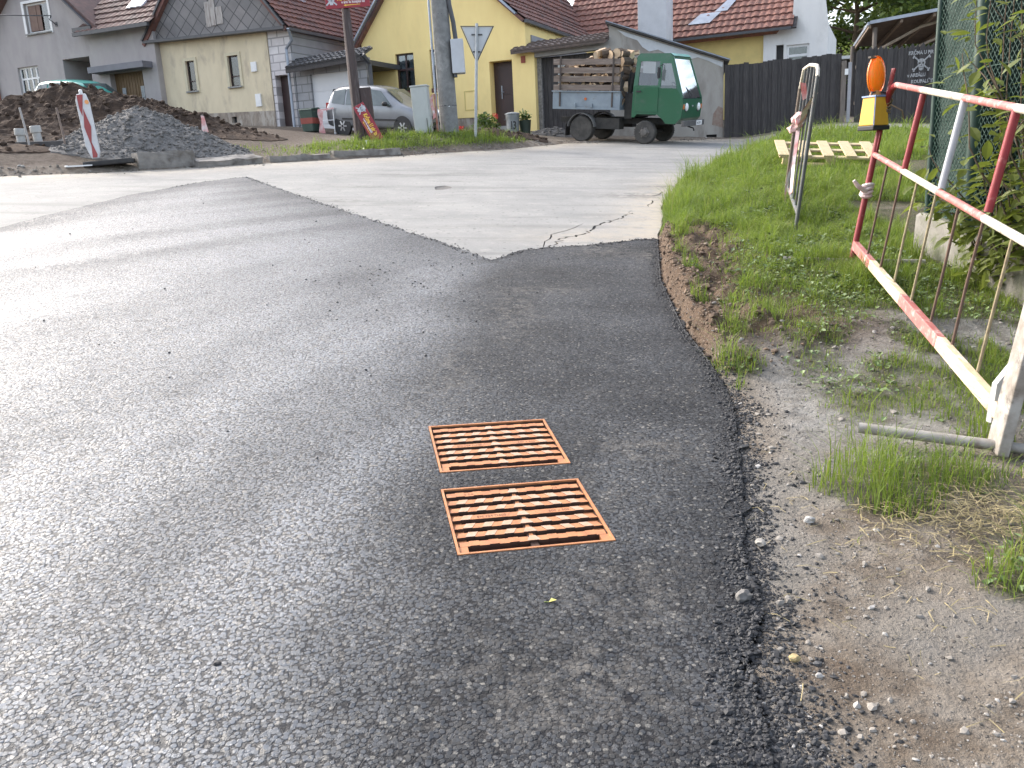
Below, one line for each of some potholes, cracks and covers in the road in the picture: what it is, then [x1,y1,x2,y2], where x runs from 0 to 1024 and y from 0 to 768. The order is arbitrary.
crack [543,192,662,247]
drain grate [441,478,616,556]
drain grate [429,419,570,473]
